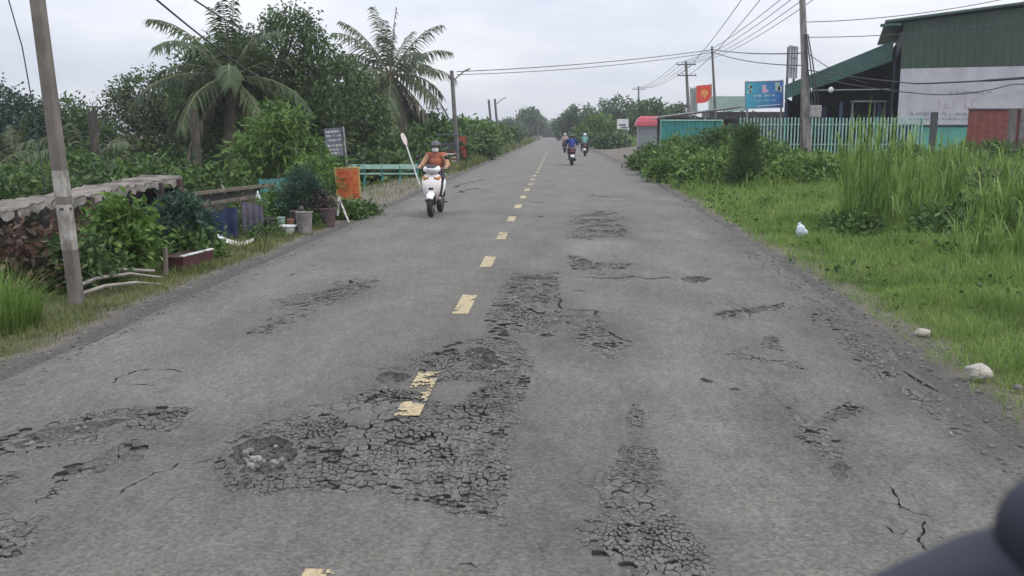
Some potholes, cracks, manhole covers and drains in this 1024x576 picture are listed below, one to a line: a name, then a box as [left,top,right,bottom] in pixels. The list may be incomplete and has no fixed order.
pothole [217,431,306,478]
crack [878,486,943,550]
crack [0,195,675,564]
pothole [0,416,132,449]
pothole [460,345,518,372]
crack [807,313,968,434]
